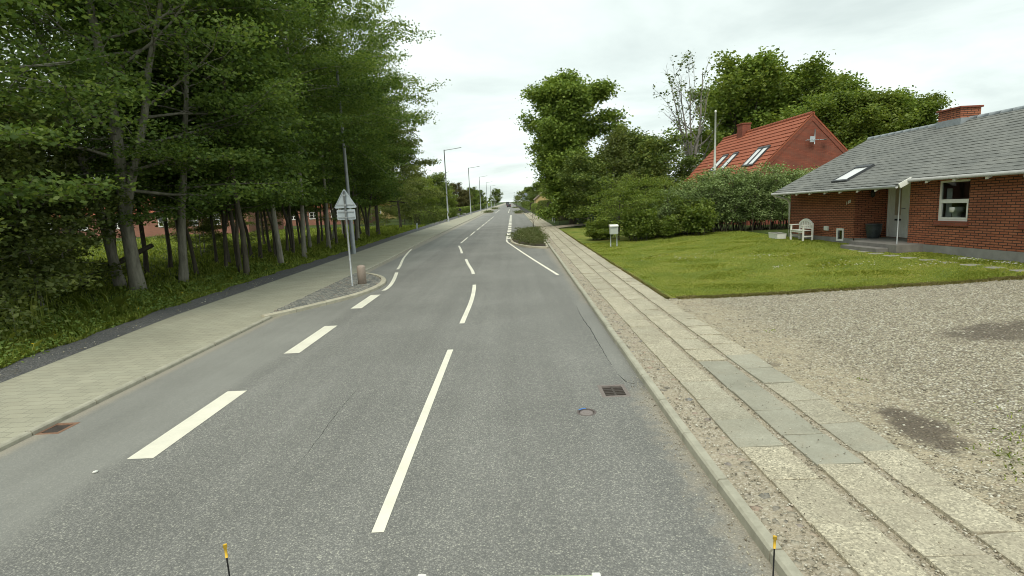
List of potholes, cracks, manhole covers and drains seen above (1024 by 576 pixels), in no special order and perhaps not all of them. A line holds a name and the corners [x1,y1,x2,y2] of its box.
drain grate [35,422,80,435]
drain grate [597,384,631,397]
manhole cover [577,408,597,416]
